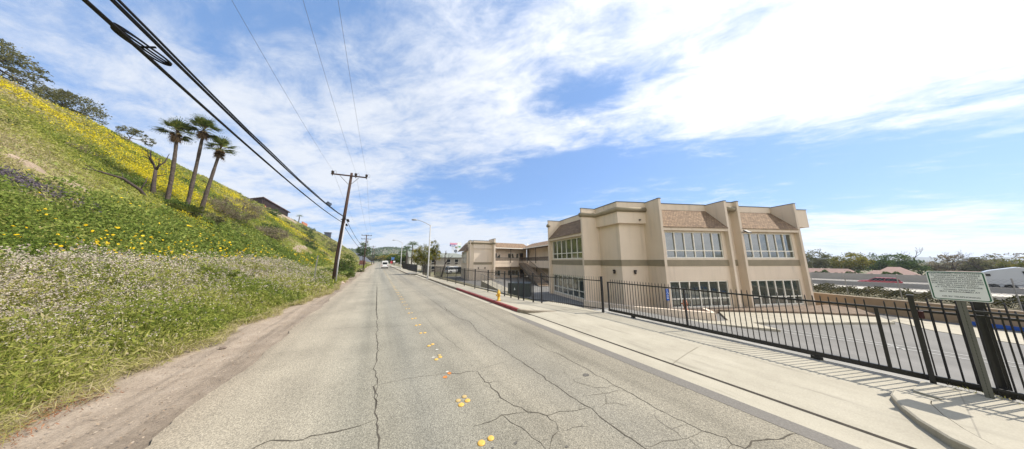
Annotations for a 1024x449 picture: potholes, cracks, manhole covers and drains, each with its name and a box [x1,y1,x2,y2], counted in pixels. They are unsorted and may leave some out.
crack [252,292,402,449]
crack [540,346,797,449]
crack [392,363,584,449]
